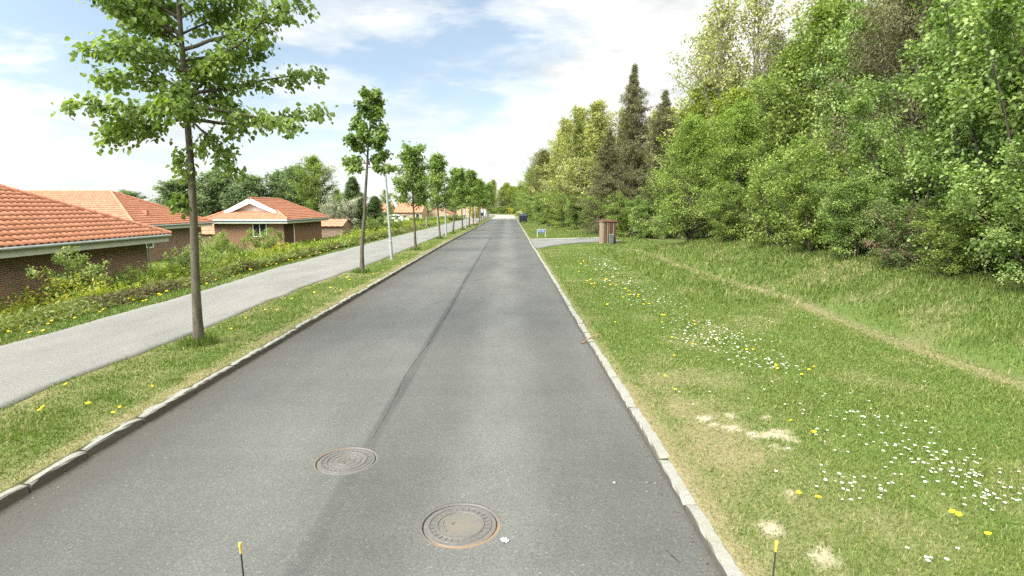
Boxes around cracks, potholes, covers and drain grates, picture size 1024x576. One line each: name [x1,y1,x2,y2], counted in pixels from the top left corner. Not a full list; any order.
manhole cover [419,502,501,549]
manhole cover [313,447,379,475]
